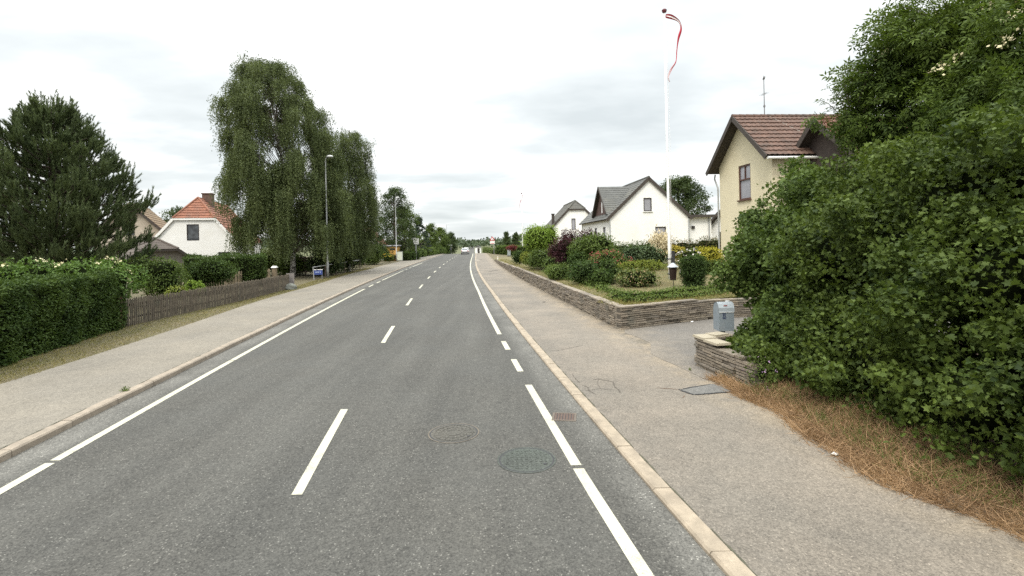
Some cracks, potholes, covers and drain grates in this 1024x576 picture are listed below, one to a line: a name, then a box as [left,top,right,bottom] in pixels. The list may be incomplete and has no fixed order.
drain grate [552,412,577,421]
manhole cover [428,423,479,443]
manhole cover [497,447,556,473]
